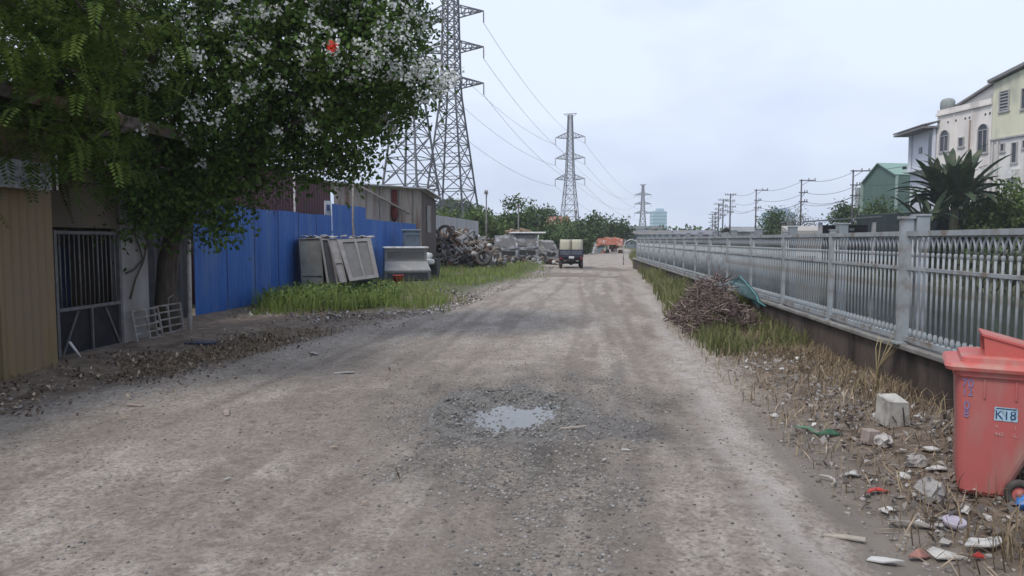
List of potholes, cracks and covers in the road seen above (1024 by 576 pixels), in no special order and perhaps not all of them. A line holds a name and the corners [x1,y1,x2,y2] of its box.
pothole [427,387,590,443]
